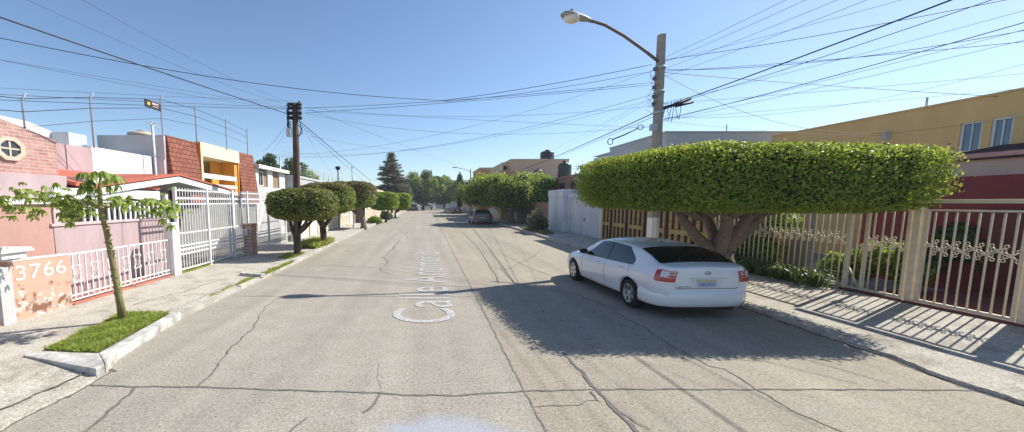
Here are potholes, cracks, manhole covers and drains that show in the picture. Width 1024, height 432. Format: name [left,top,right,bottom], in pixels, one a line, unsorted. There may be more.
crack [0,368,137,432]
crack [440,214,843,432]
crack [197,297,280,386]
